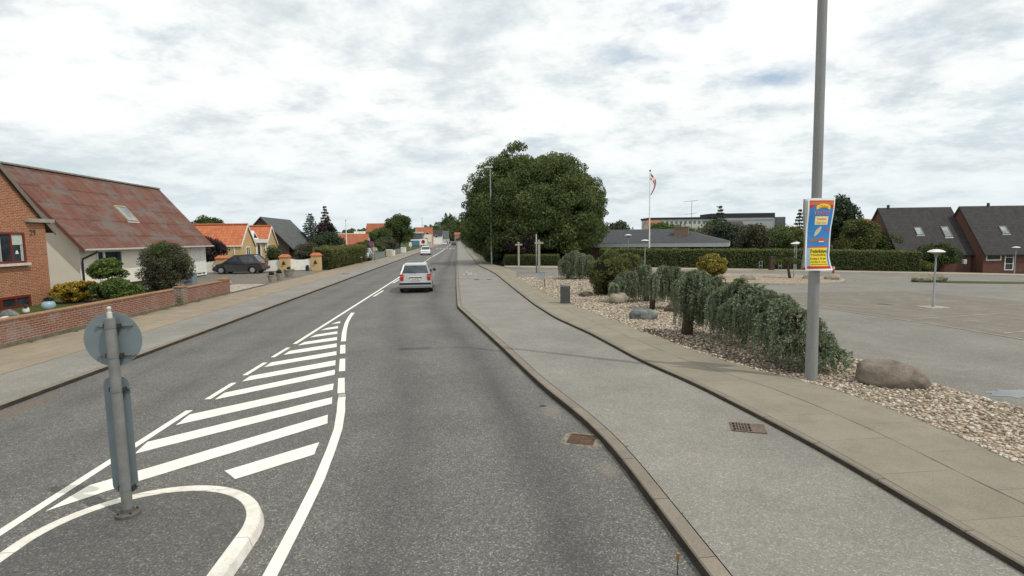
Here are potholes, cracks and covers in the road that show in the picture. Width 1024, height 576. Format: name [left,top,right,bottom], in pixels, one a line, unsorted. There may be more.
drain grate [729,422,767,434]
